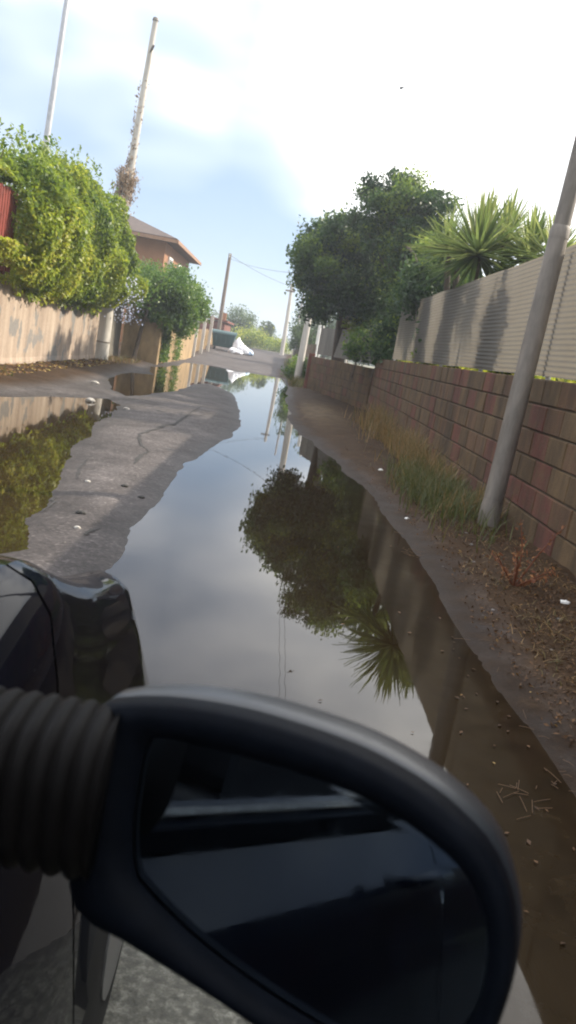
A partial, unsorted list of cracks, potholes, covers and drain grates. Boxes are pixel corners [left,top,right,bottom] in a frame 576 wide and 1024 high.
crack [134,406,201,464]
